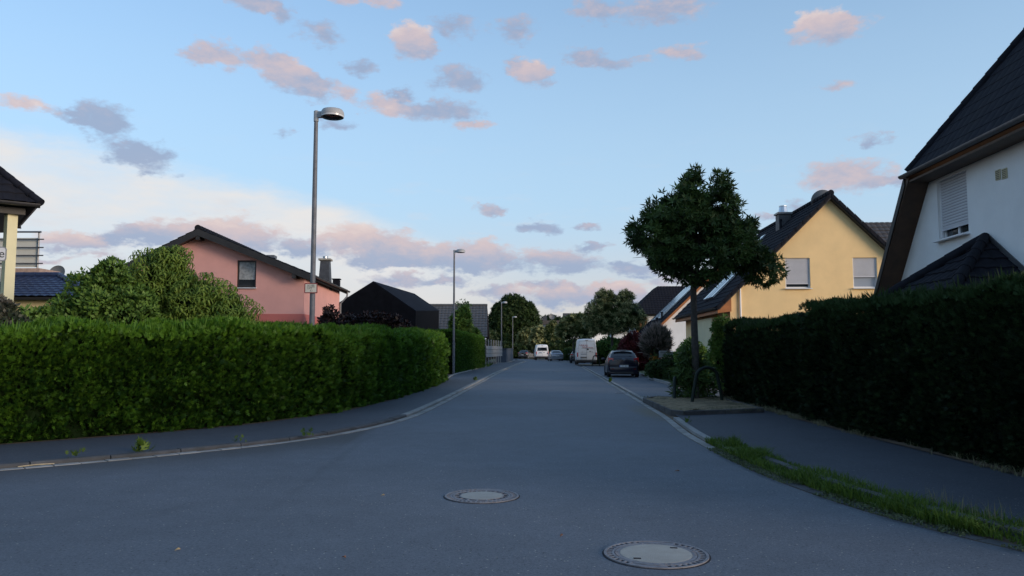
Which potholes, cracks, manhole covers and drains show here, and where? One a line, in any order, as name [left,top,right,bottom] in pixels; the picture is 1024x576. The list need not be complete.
manhole cover [443,489,520,504]
manhole cover [602,540,711,570]
